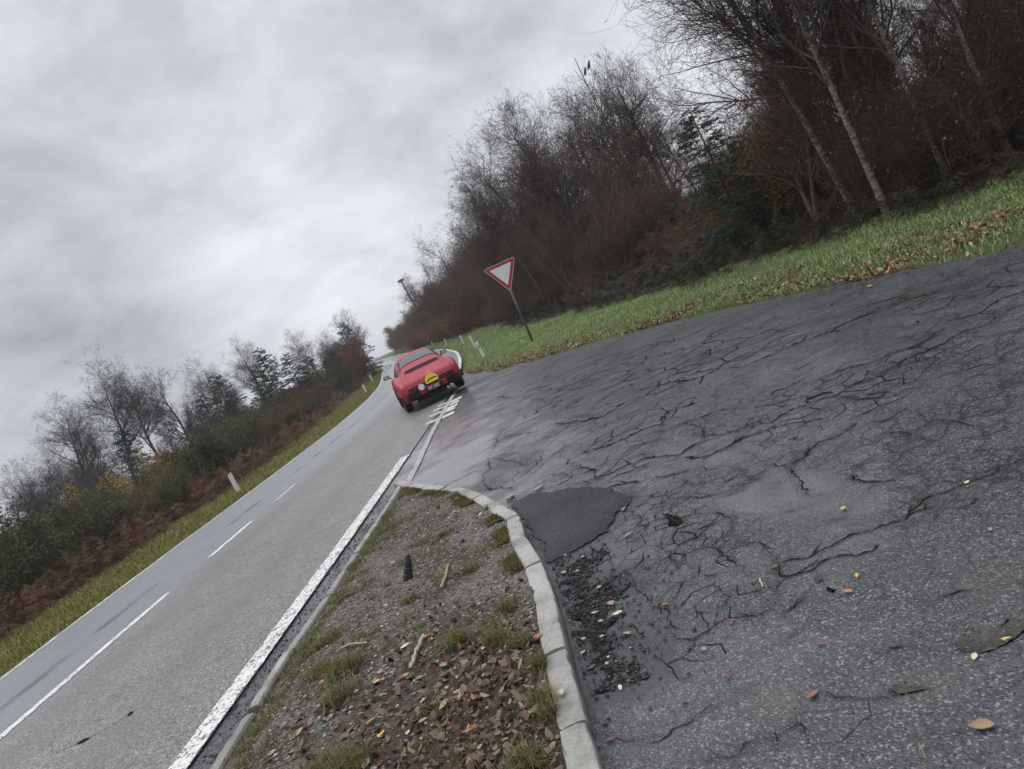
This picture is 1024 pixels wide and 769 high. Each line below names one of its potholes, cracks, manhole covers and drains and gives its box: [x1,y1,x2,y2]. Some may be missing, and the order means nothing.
crack [775,686,931,744]
pothole [662,513,683,526]
crack [446,266,1024,679]
pothole [558,549,650,692]
crack [603,702,754,757]
